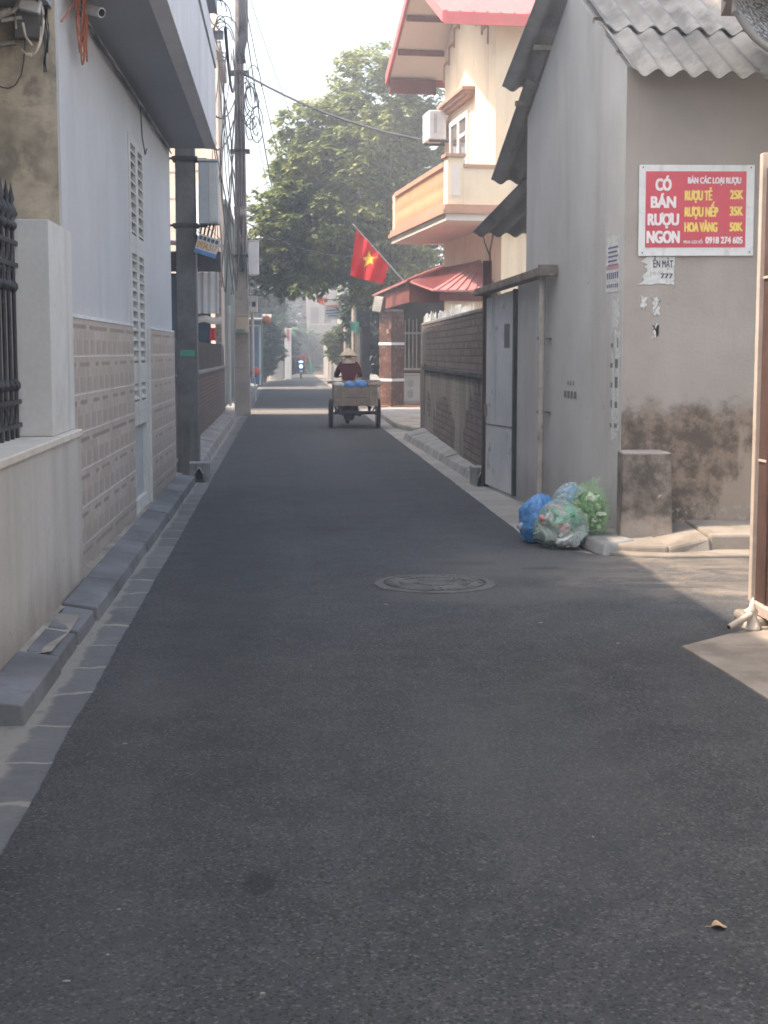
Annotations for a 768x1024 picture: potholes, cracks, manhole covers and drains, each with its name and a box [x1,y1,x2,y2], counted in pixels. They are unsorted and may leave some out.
manhole cover [374,574,496,594]
drain grate [189,461,210,482]
